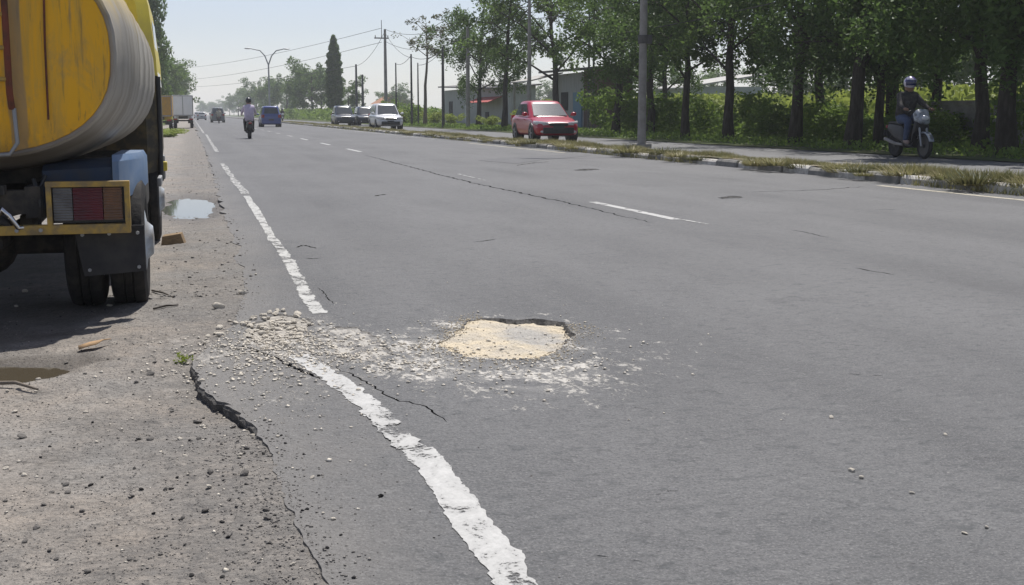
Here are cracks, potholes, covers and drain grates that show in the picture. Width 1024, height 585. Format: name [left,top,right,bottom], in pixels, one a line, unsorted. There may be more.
pothole [436,318,576,359]
crack [190,345,447,447]
